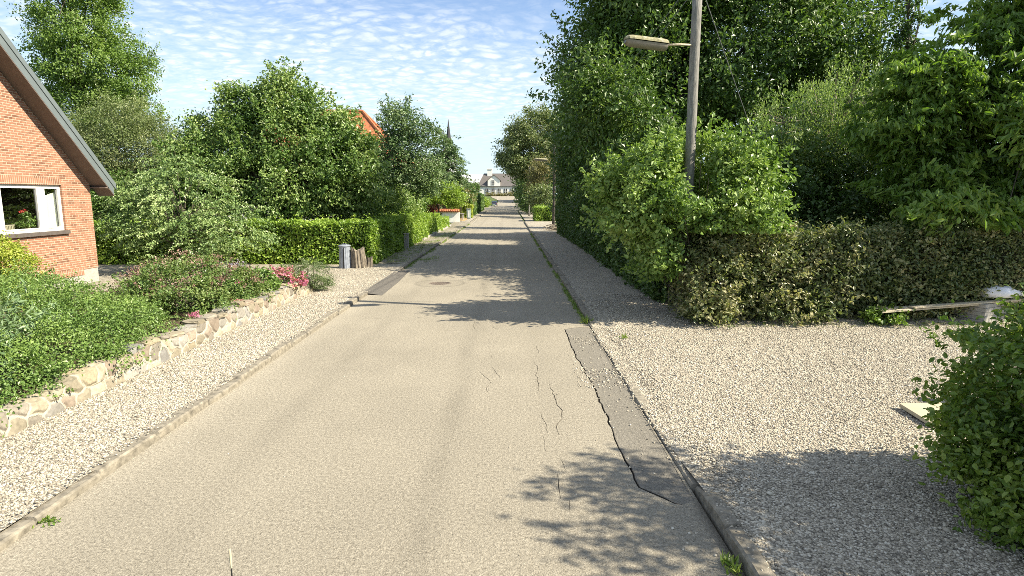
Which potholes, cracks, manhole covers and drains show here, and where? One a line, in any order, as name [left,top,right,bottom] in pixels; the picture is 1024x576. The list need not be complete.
crack [535,346,570,510]
crack [565,328,691,505]
